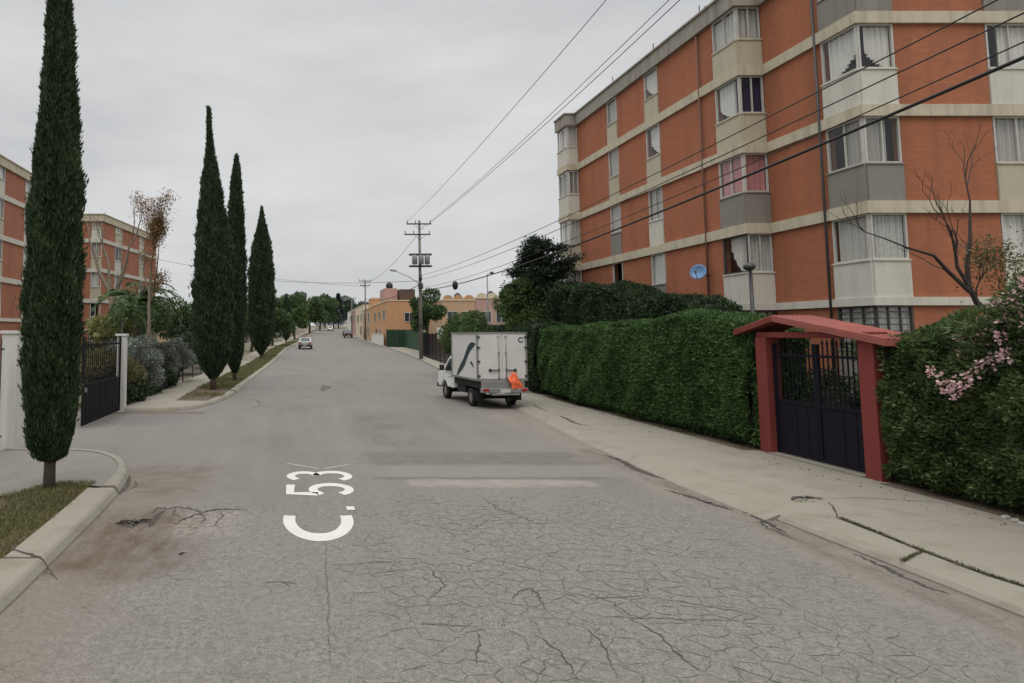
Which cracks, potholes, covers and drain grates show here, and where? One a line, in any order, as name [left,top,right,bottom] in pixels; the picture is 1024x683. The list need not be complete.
crack [333,497,1000,683]
crack [119,475,138,494]
pothole [109,518,154,528]
crack [5,544,58,580]
crack [601,454,792,538]
